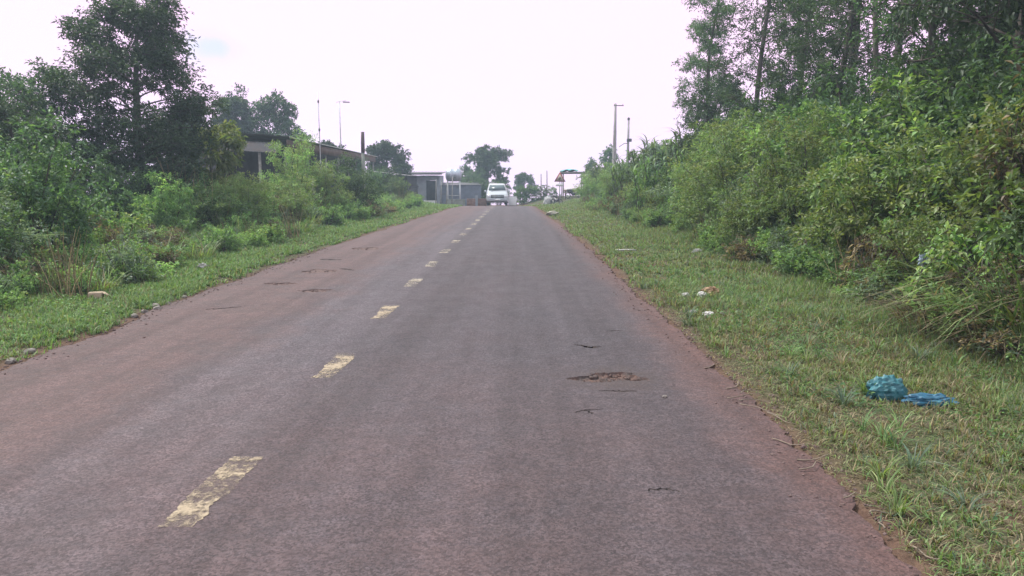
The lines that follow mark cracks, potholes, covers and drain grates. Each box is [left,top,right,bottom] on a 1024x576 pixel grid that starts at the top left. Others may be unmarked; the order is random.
pothole [567,372,649,382]
crack [575,330,623,348]
